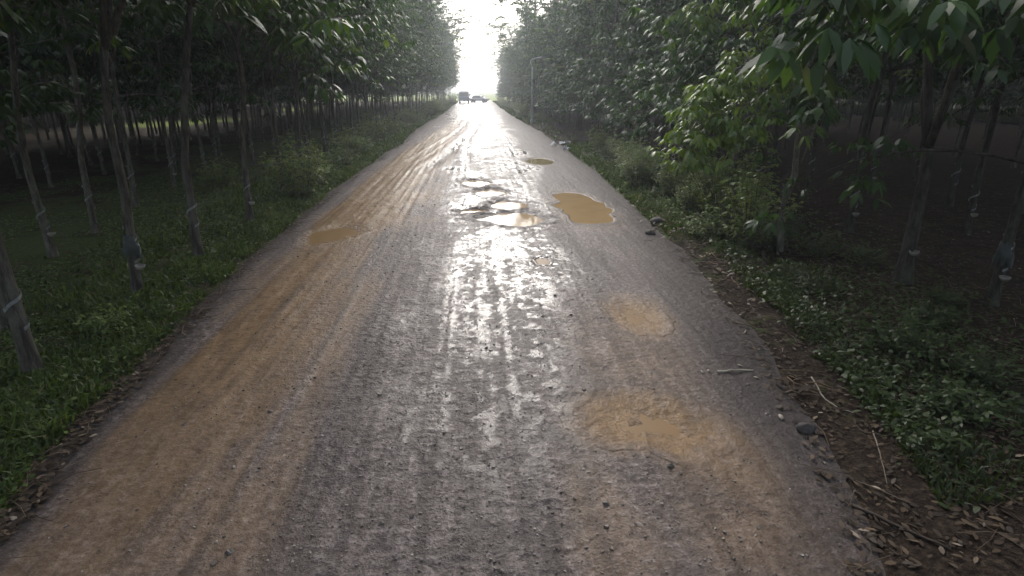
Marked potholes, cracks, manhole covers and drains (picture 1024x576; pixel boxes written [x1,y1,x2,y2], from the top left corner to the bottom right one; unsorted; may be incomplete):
pothole [290,222,378,249]
pothole [547,189,622,228]
pothole [486,199,534,210]
pothole [521,157,558,166]
pothole [469,210,550,228]
pothole [599,294,677,337]
pothole [471,187,511,198]
pothole [456,178,495,187]
pothole [560,382,747,472]
pothole [532,257,553,266]
